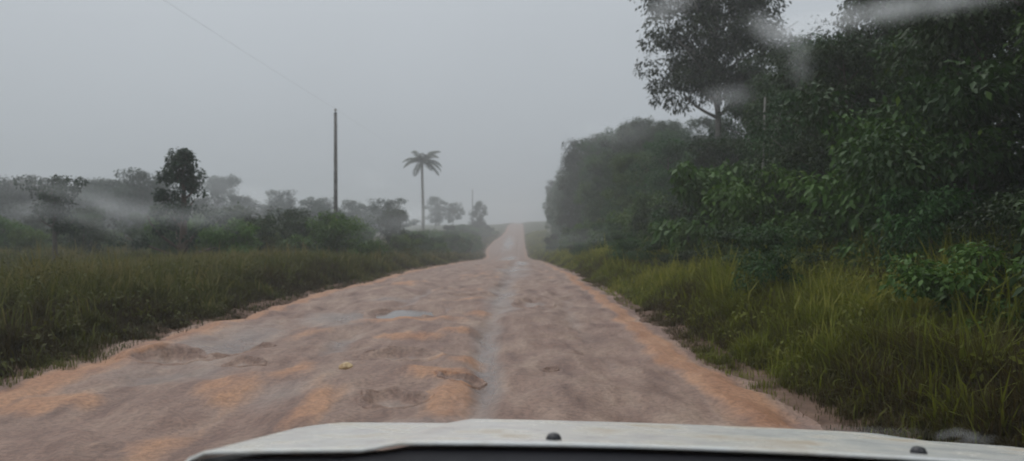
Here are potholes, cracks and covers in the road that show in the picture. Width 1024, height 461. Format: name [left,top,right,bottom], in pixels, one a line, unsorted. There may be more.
pothole [361,303,450,319]
pothole [356,386,435,409]
pothole [435,370,488,389]
pothole [115,342,215,366]
pothole [222,355,267,368]
